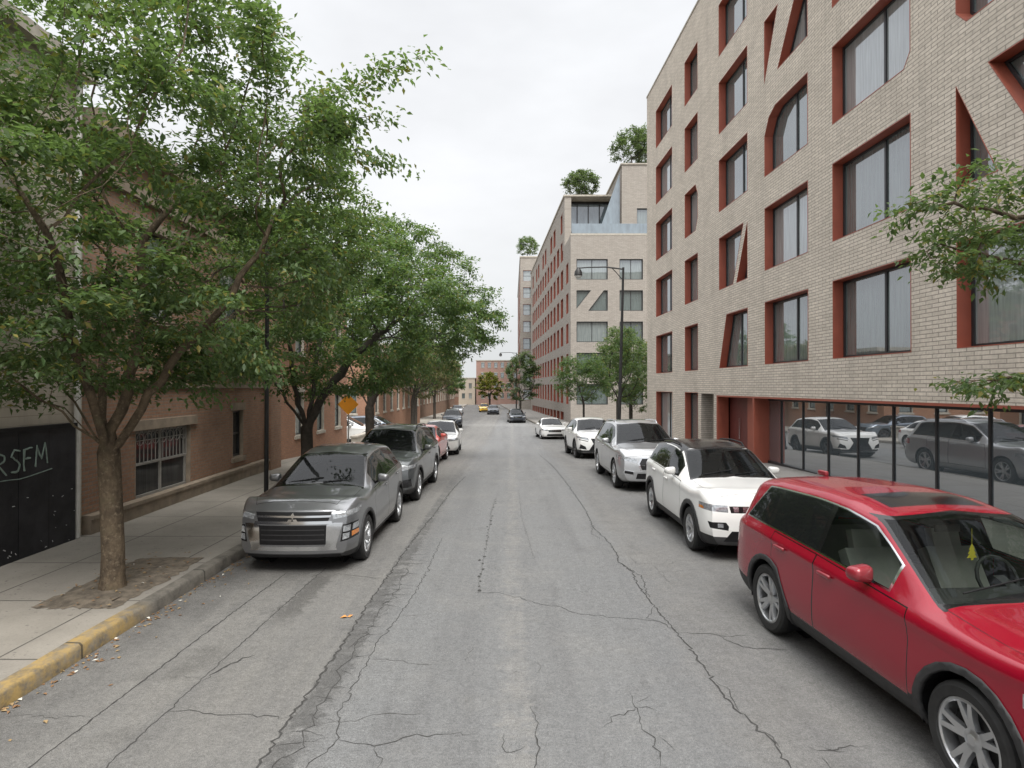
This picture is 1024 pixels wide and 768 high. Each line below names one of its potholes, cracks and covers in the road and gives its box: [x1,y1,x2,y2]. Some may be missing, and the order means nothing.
crack [610,695,674,766]
crack [106,572,322,768]
crack [810,745,866,768]
crack [342,732,470,768]
crack [502,694,544,768]
crack [683,632,789,650]
crack [477,500,643,620]
